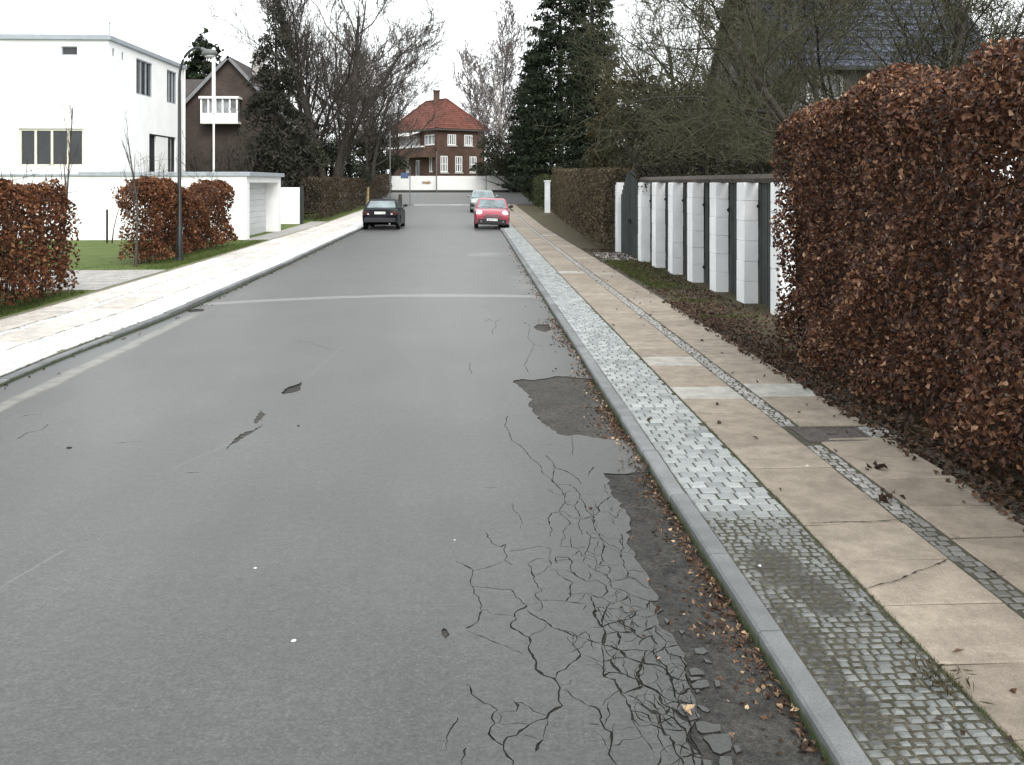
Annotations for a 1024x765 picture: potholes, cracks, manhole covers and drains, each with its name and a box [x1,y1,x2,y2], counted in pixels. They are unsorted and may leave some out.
pothole [281,381,303,394]
pothole [604,472,827,765]
crack [869,559,948,588]
manhole cover [790,426,871,443]
pothole [513,376,627,440]
crack [445,416,701,765]
